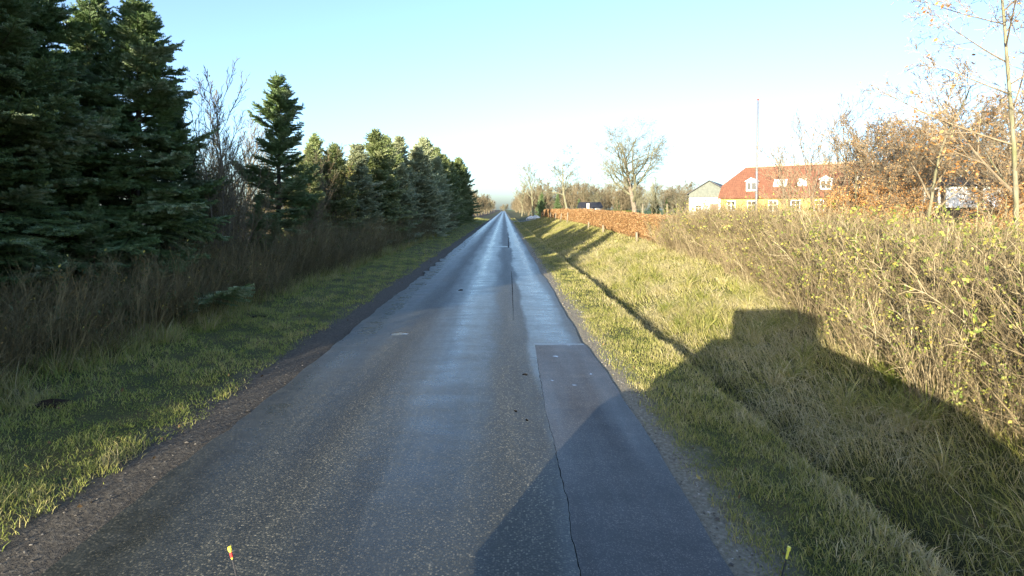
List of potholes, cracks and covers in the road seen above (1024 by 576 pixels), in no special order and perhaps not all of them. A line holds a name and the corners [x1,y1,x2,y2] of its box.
crack [531,357,581,576]
